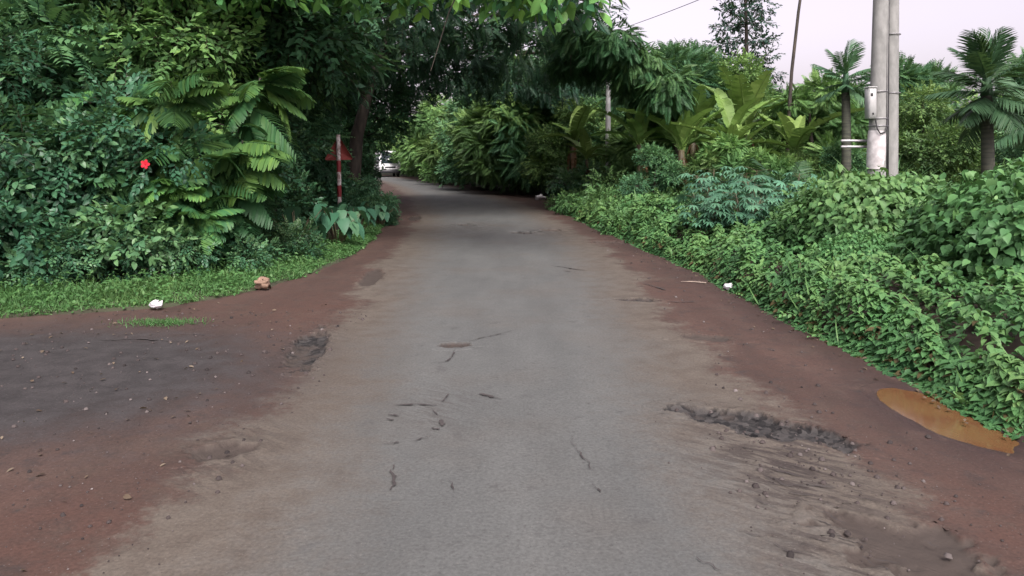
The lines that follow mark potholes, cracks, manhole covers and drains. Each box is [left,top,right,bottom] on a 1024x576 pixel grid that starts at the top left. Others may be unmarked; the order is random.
crack [384,394,449,444]
pothole [269,321,339,389]
pothole [150,437,277,469]
crack [390,465,454,490]
pothole [641,395,886,460]
